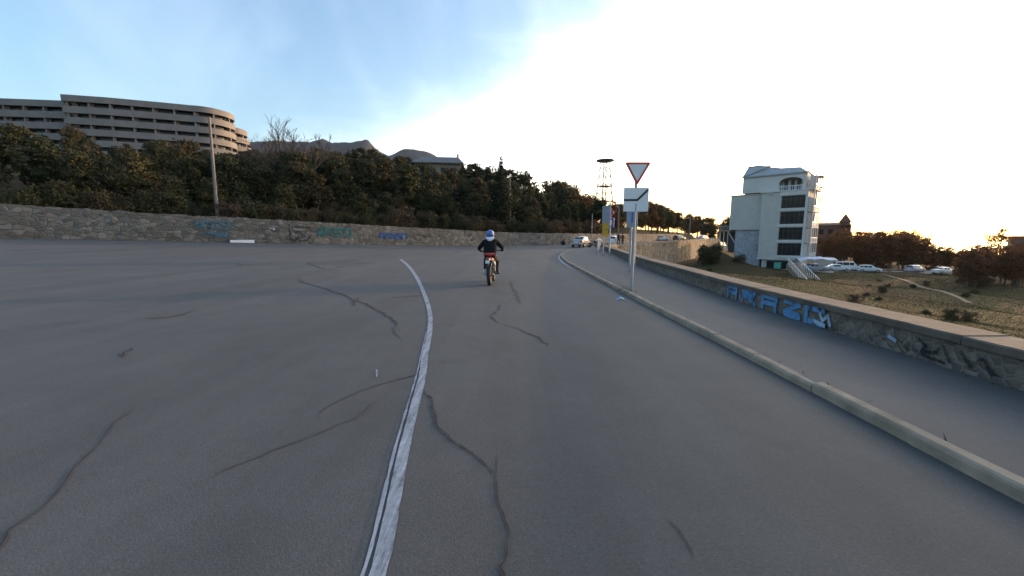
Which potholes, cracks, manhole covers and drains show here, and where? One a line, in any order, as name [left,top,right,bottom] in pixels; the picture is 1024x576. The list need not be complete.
crack [490,281,549,346]
crack [668,519,695,555]
crack [0,403,133,548]
crack [298,261,428,340]
crack [193,374,511,576]
